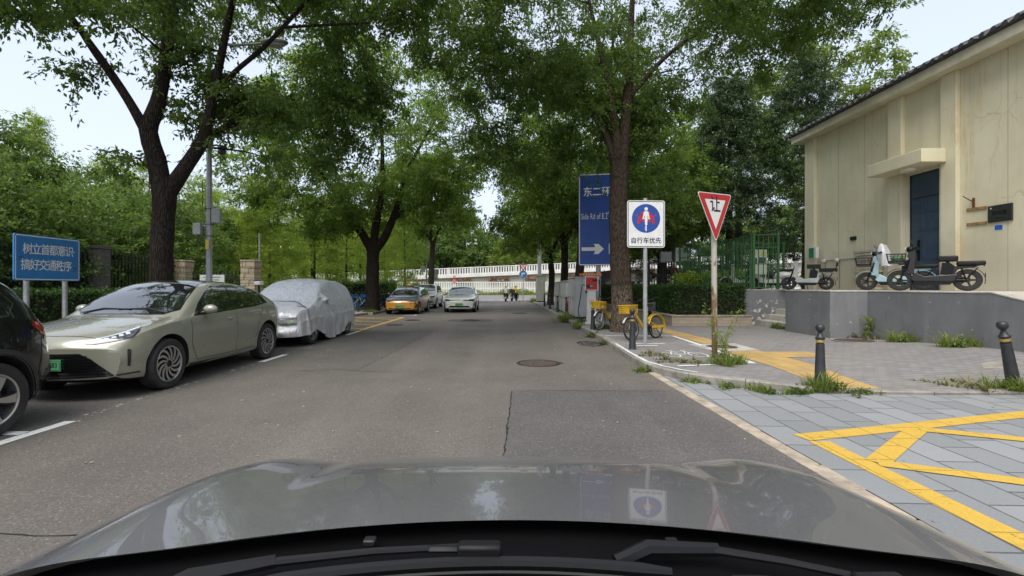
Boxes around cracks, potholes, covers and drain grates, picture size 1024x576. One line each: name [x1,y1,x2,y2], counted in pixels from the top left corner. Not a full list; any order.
manhole cover [517,359,563,367]
